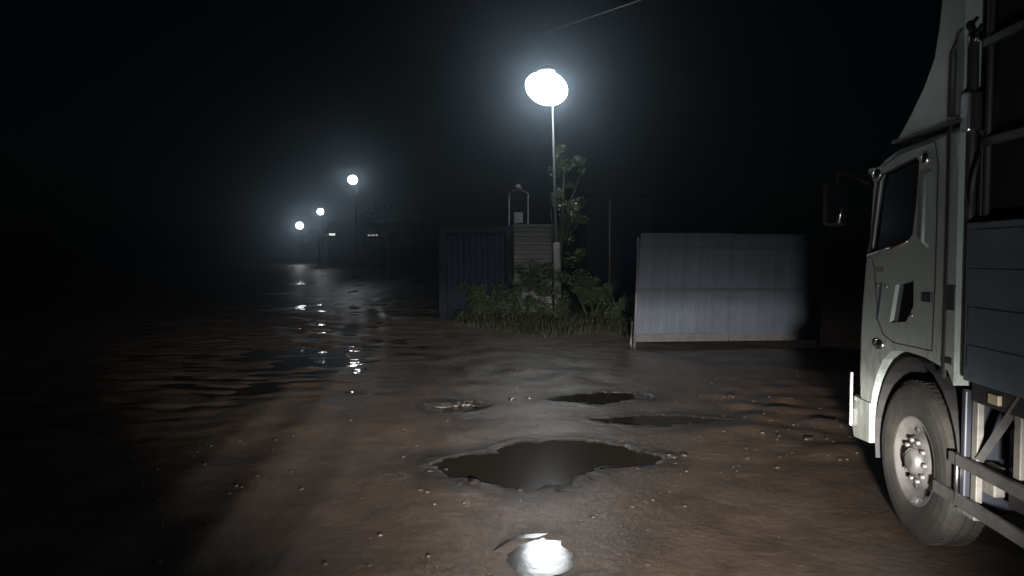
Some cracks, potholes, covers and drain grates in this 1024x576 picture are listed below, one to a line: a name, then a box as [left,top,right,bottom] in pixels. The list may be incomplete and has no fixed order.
pothole [412,436,683,497]
pothole [578,412,746,430]
pothole [415,399,502,415]
pothole [534,390,666,407]
